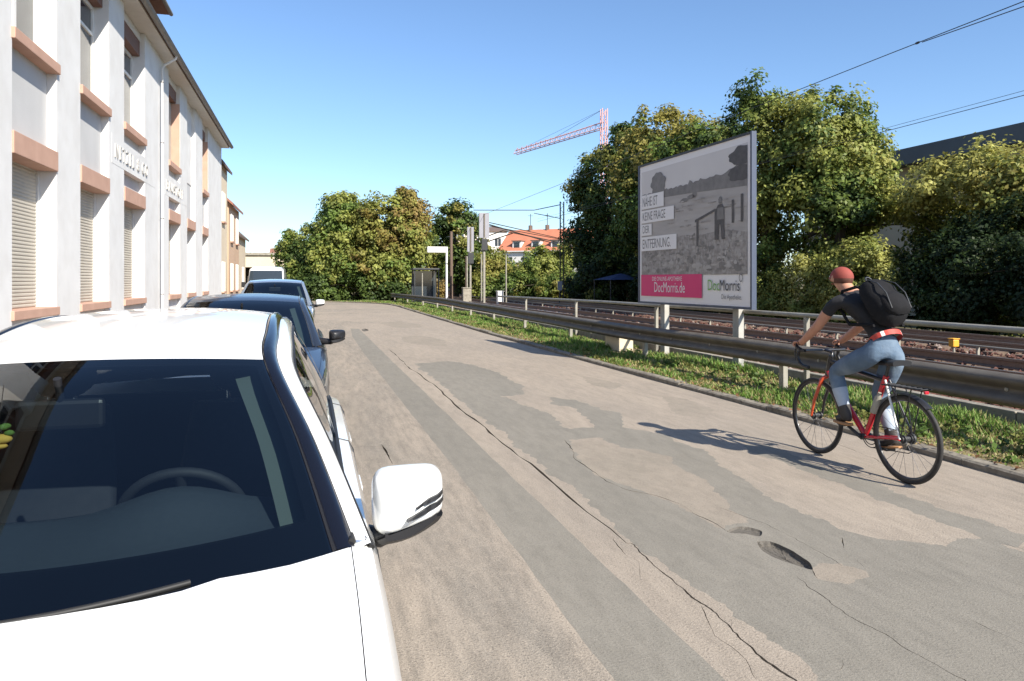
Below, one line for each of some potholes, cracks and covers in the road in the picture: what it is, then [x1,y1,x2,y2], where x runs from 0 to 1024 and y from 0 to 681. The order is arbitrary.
pothole [757,541,813,570]
pothole [727,526,762,536]
crack [391,351,966,681]
